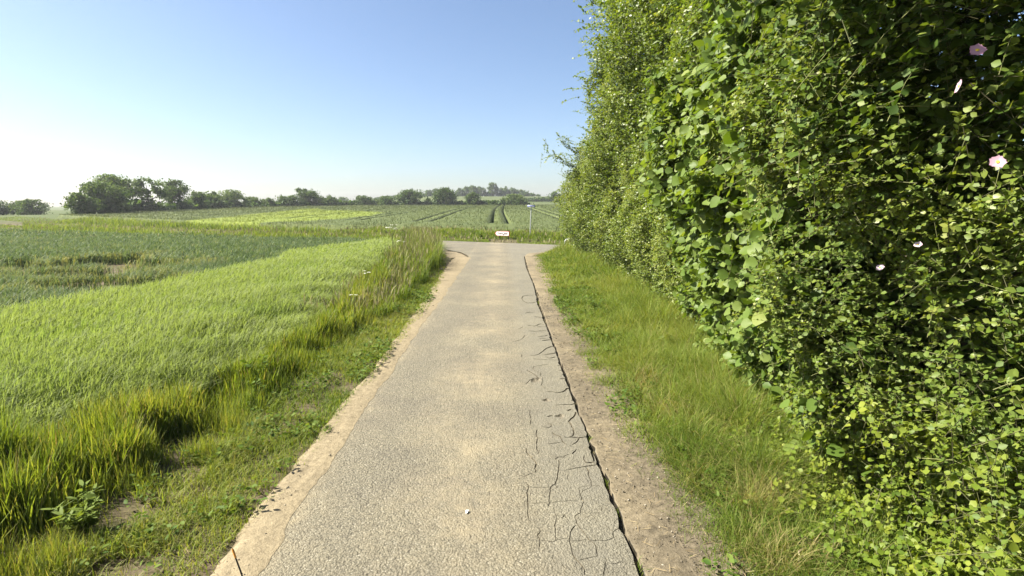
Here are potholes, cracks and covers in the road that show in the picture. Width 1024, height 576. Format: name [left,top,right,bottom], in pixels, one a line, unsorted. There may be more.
crack [514,256,645,576]
